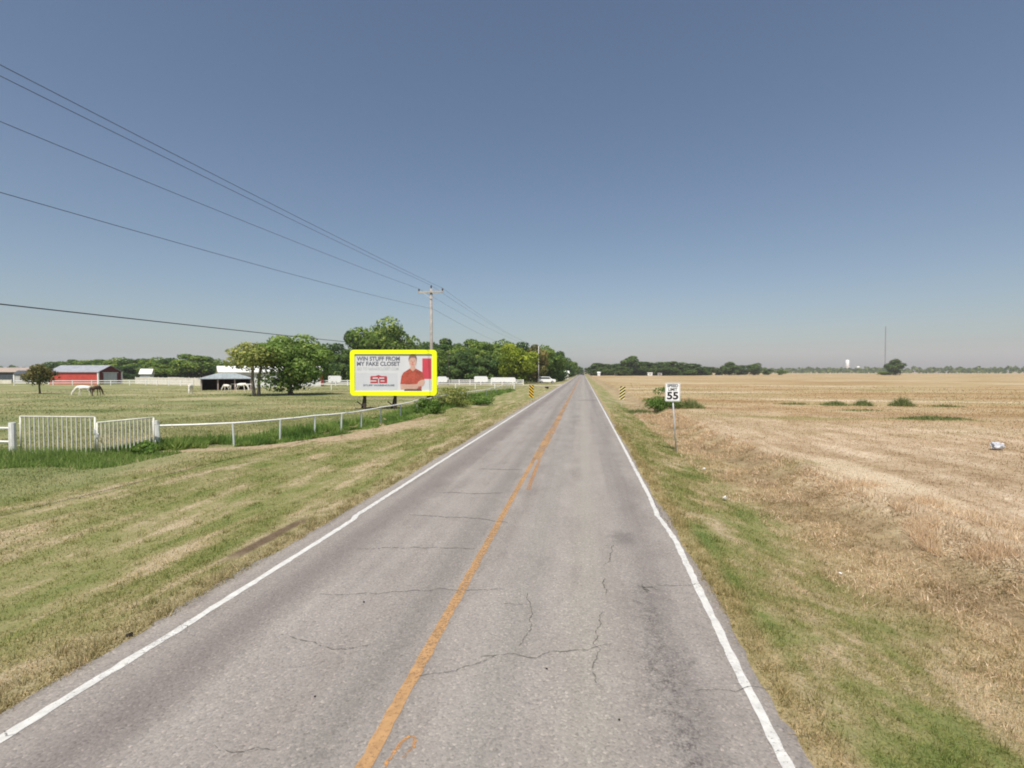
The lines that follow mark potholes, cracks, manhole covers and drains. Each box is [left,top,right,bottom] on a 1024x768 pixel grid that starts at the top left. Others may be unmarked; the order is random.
crack [417,593,611,682]
